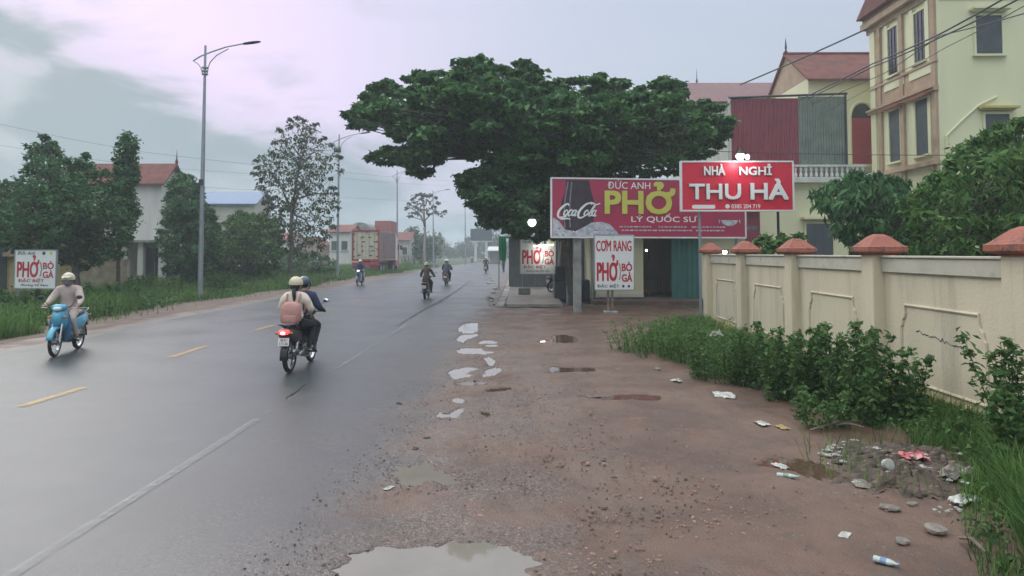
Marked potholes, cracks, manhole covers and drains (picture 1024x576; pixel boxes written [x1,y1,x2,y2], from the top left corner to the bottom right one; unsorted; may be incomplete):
pothole [482,356,498,367]
pothole [442,366,486,381]
pothole [543,365,607,374]
pothole [568,393,674,402]
pothole [748,454,855,486]
pothole [384,460,468,489]
pothole [452,333,480,343]
pothole [475,366,505,378]
pothole [432,406,486,420]
pothole [534,333,586,344]
pothole [320,537,554,576]
